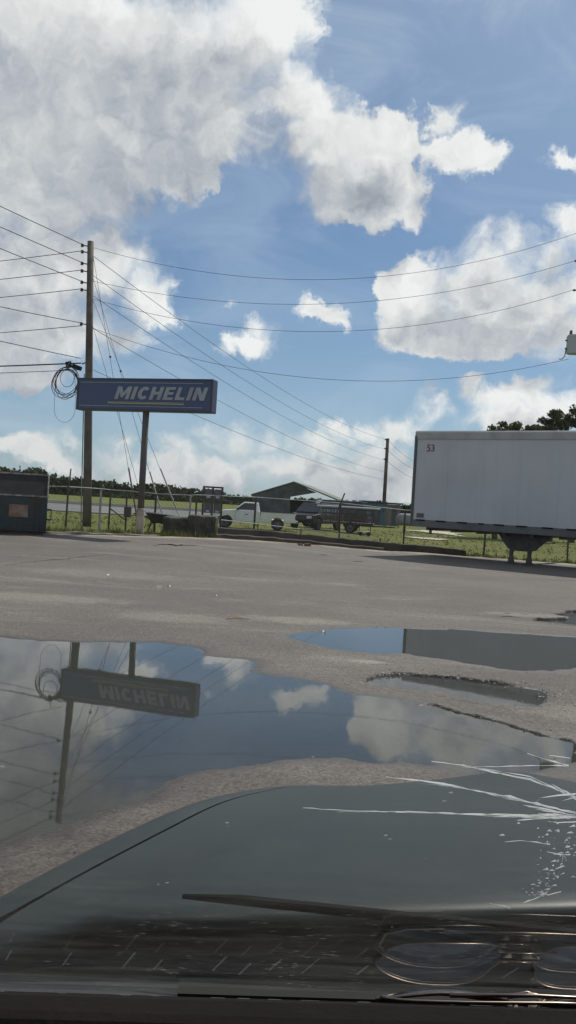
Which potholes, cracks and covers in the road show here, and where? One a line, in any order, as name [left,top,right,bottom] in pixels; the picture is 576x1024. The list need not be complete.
pothole [349,671,576,710]
